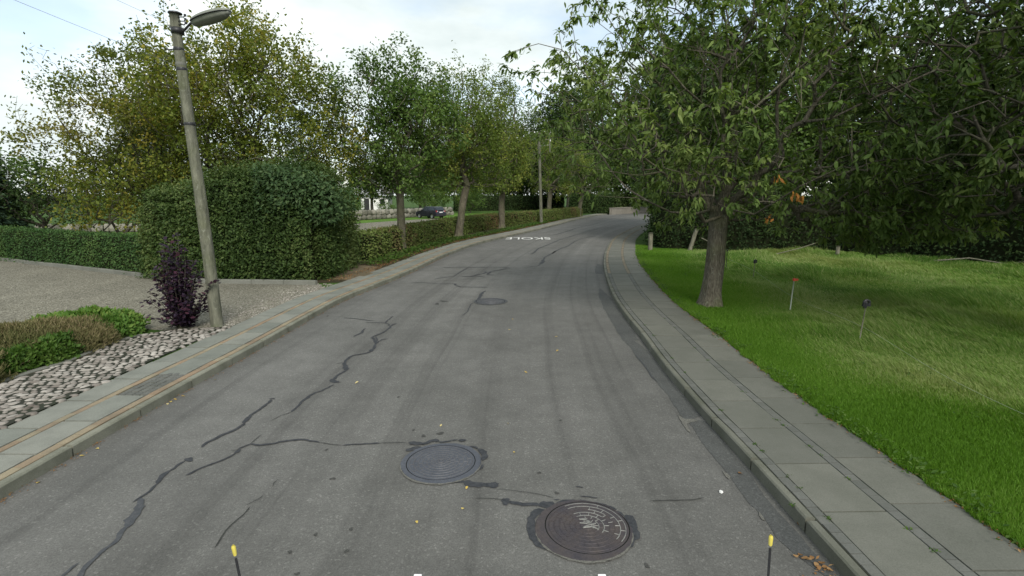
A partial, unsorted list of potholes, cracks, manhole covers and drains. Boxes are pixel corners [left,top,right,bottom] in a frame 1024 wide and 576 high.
crack [215,479,278,547]
manhole cover [400,443,481,485]
crack [420,267,507,315]
crack [531,237,587,267]
manhole cover [535,500,634,564]
